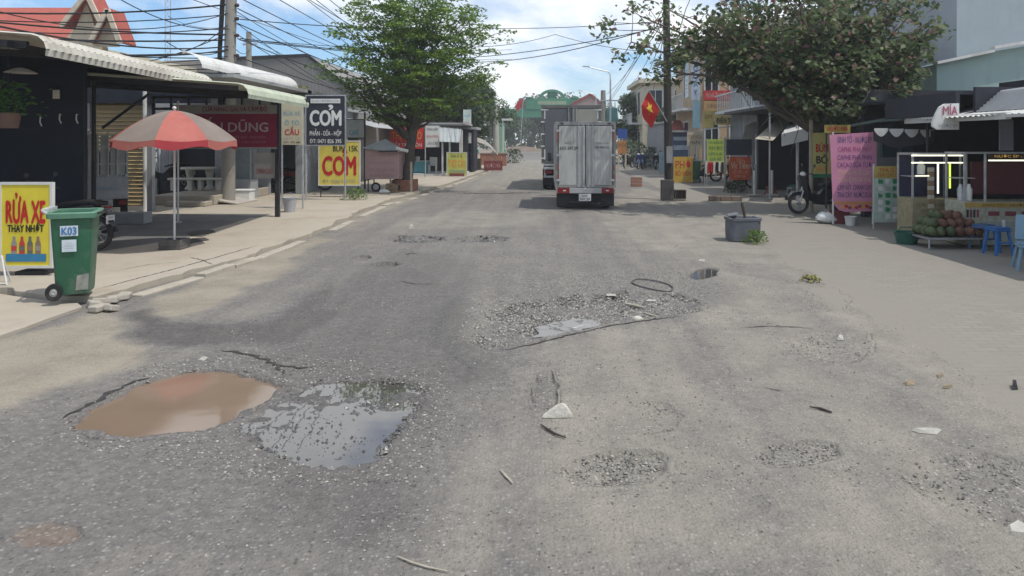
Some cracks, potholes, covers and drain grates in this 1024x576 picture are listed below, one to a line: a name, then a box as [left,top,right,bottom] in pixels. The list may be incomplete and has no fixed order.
pothole [462,290,715,352]
pothole [880,449,1024,537]
pothole [222,375,437,474]
pothole [58,365,304,442]
pothole [542,446,678,490]
pothole [364,261,406,269]
crack [221,350,313,374]
crack [63,378,147,418]
pothole [769,328,877,366]
pothole [737,437,850,472]
pothole [441,235,513,243]
